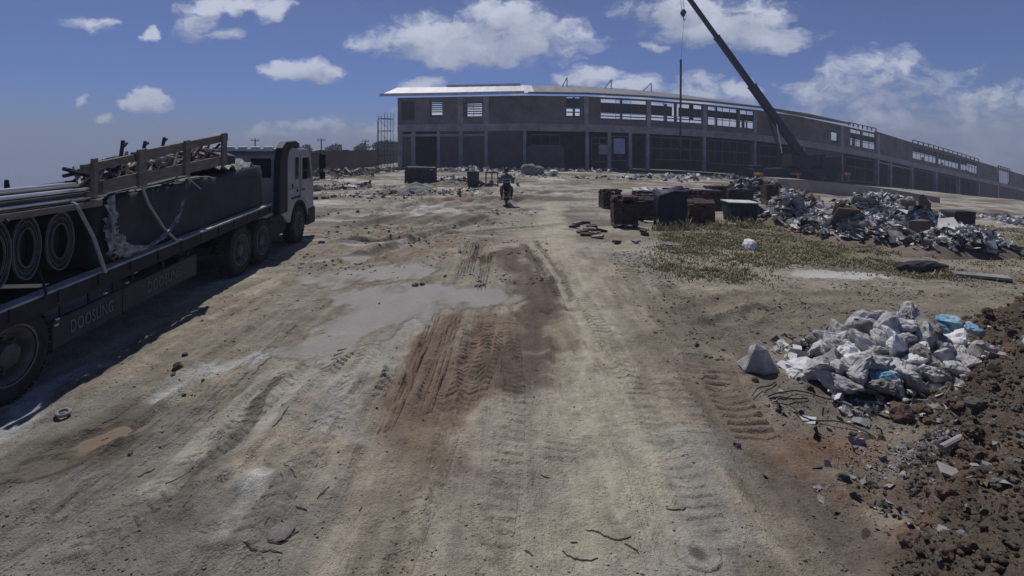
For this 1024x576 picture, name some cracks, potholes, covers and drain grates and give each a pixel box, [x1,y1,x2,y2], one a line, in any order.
pothole [37,408,169,464]
